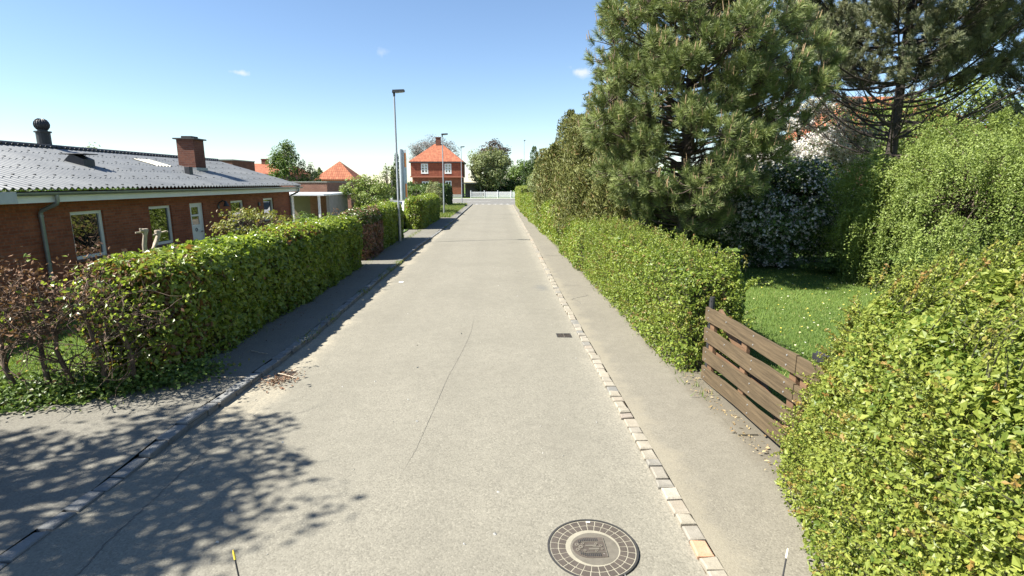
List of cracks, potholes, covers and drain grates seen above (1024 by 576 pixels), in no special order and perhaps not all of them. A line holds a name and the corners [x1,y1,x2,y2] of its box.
manhole cover [547,519,639,576]
